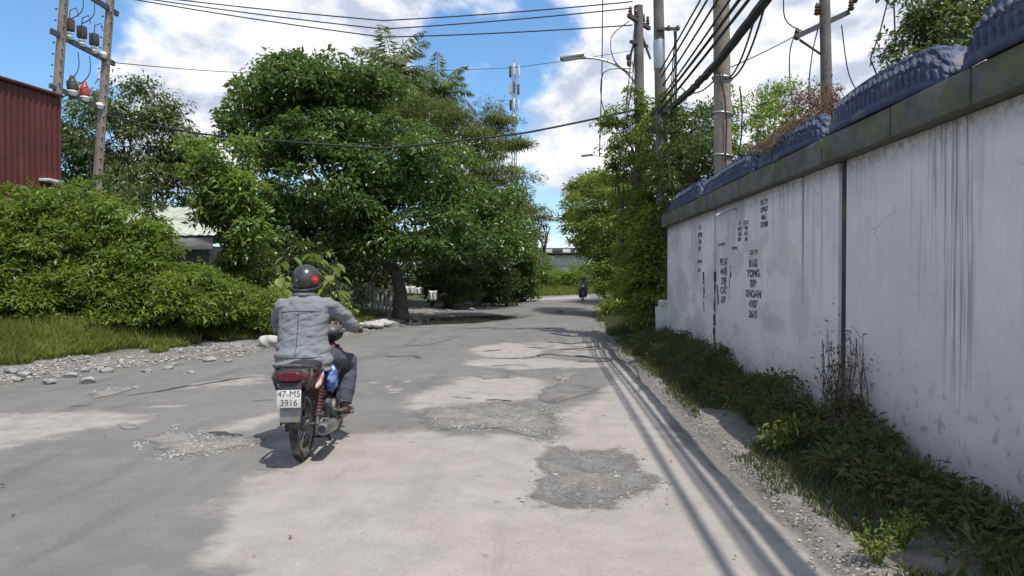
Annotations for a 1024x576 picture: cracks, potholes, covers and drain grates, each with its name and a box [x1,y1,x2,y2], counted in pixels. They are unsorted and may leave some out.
crack [487,341,612,378]
pothole [140,428,261,457]
crack [126,376,252,396]
